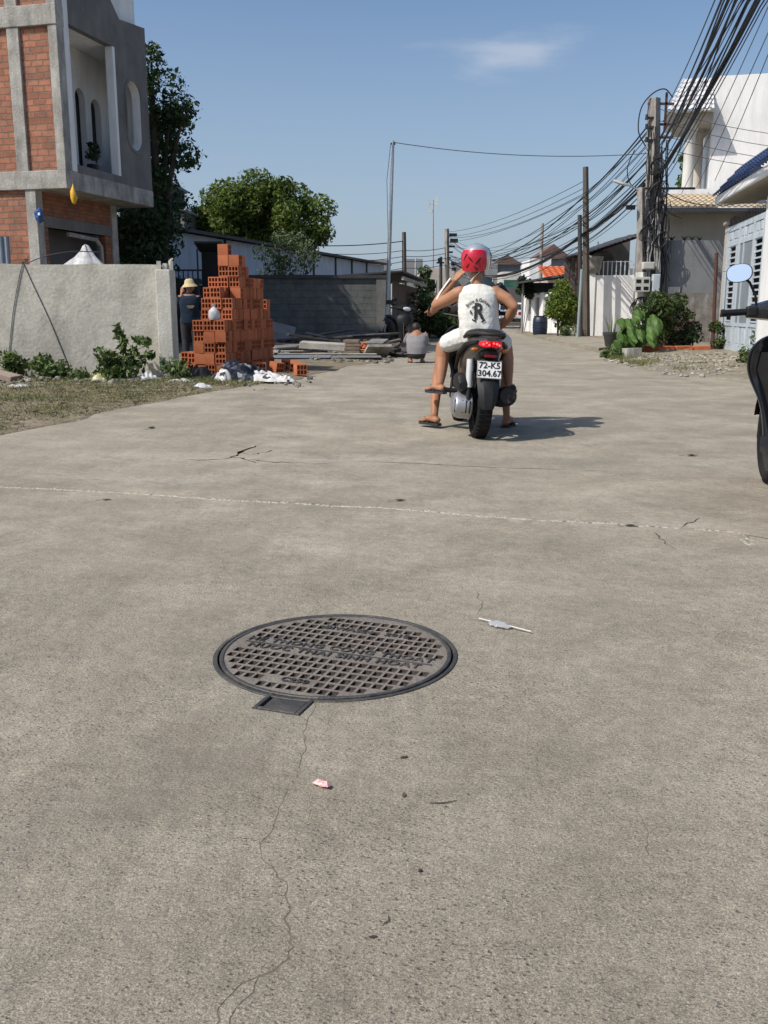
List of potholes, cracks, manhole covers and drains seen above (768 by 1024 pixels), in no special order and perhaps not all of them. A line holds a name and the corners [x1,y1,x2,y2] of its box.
manhole cover [213,614,458,716]
crack [186,445,325,464]
crack [217,710,315,1024]
